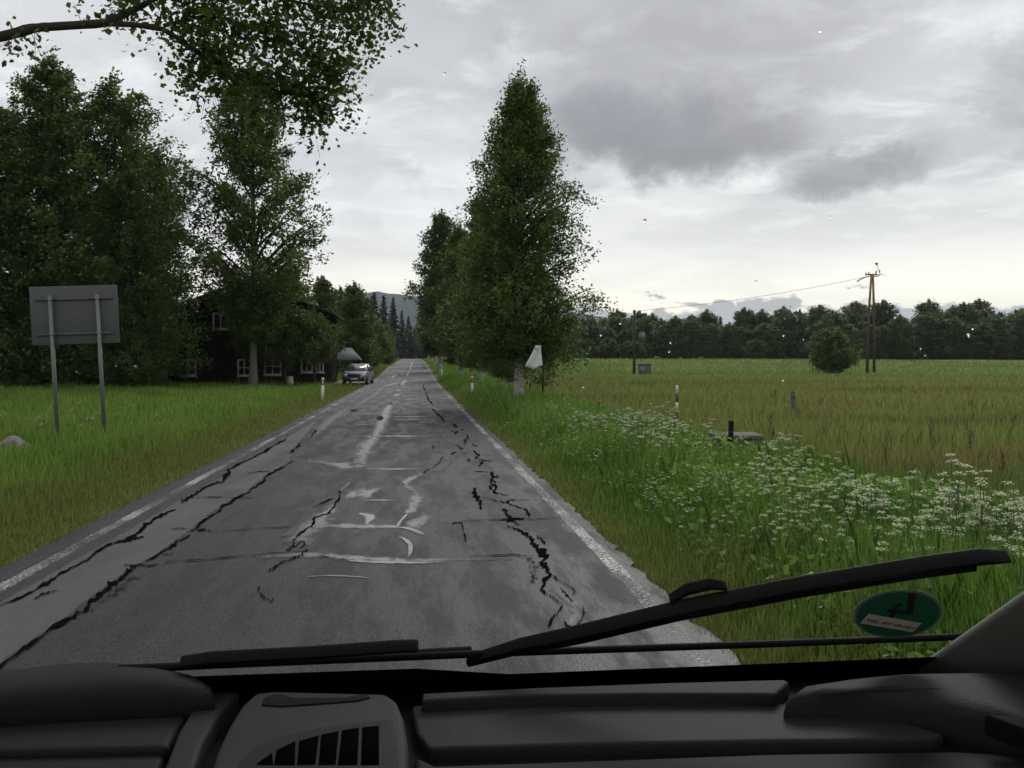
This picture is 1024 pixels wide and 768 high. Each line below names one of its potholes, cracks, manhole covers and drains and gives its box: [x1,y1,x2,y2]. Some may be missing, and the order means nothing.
crack [0,430,343,668]
crack [423,385,585,627]
